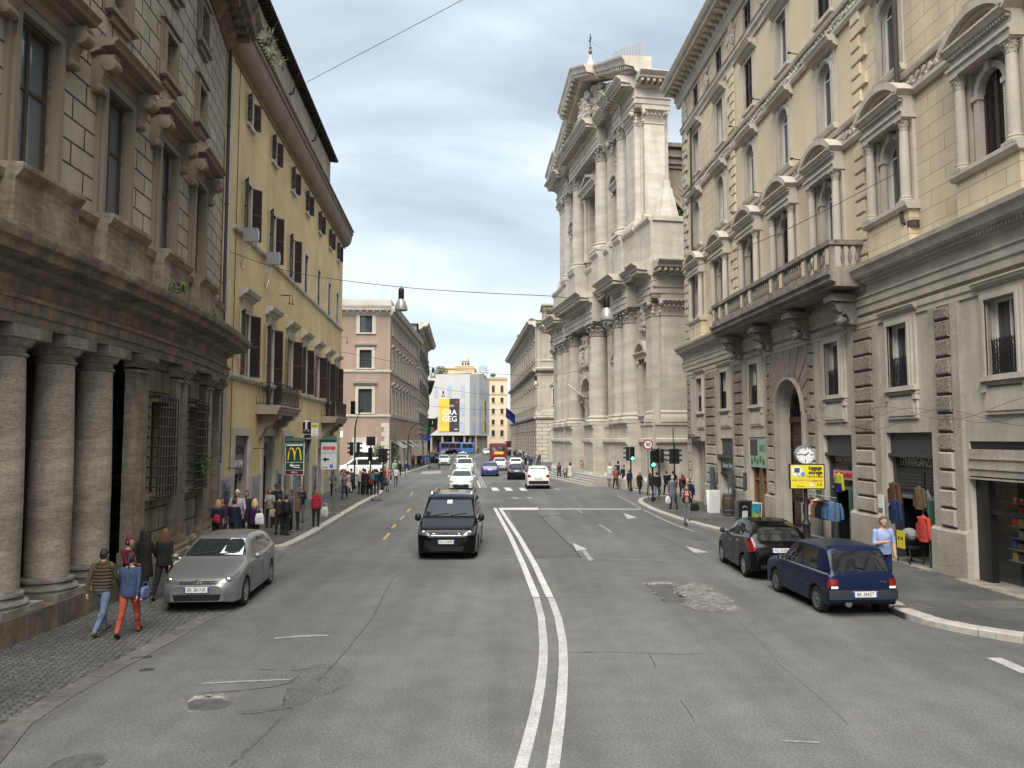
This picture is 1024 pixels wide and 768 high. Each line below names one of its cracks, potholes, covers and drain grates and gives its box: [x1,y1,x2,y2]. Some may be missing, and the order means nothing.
crack [208,570,408,714]
manhole cover [47,753,106,768]
